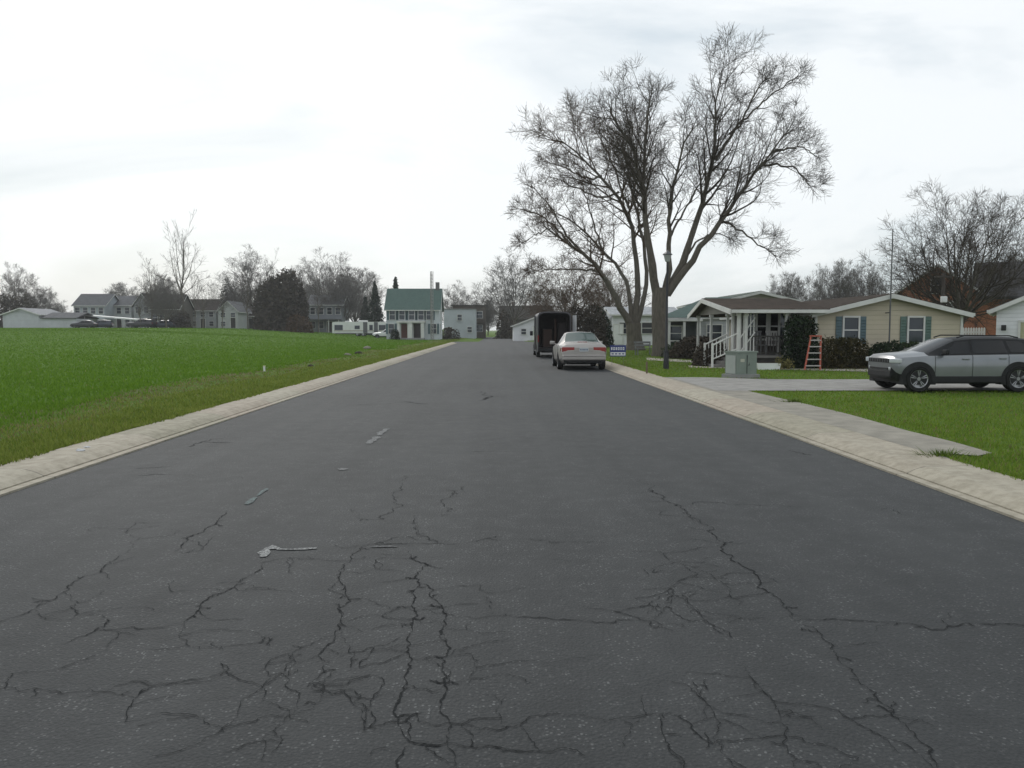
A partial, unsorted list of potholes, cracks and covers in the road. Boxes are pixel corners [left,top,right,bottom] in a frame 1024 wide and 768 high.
crack [1,477,1024,768]
